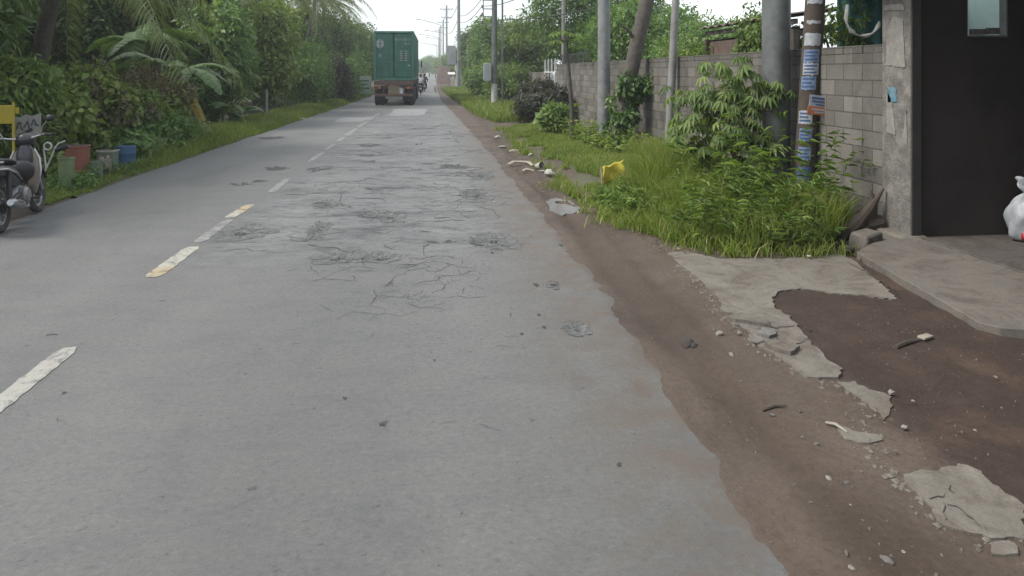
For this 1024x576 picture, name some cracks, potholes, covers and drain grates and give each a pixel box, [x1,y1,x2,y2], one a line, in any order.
pothole [563,320,592,337]
crack [213,124,531,321]
pothole [465,171,496,181]
pothole [469,232,523,250]
crack [930,485,982,529]
